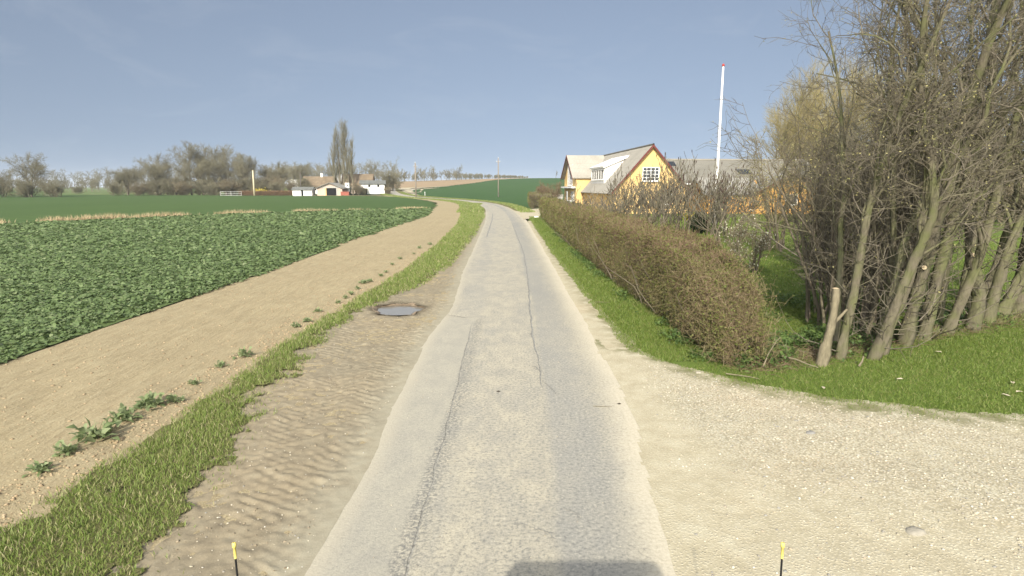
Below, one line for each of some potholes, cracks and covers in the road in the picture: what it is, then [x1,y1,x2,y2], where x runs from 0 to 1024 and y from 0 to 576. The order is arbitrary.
crack [512,224,556,394]
